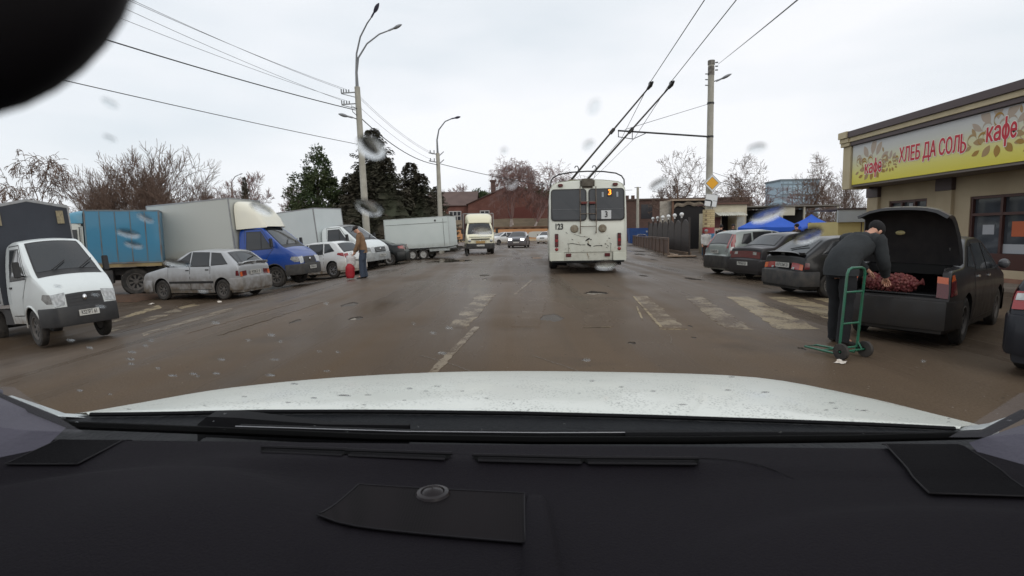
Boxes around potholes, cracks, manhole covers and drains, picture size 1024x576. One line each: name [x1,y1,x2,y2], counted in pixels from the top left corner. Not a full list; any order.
pothole [540,314,564,322]
